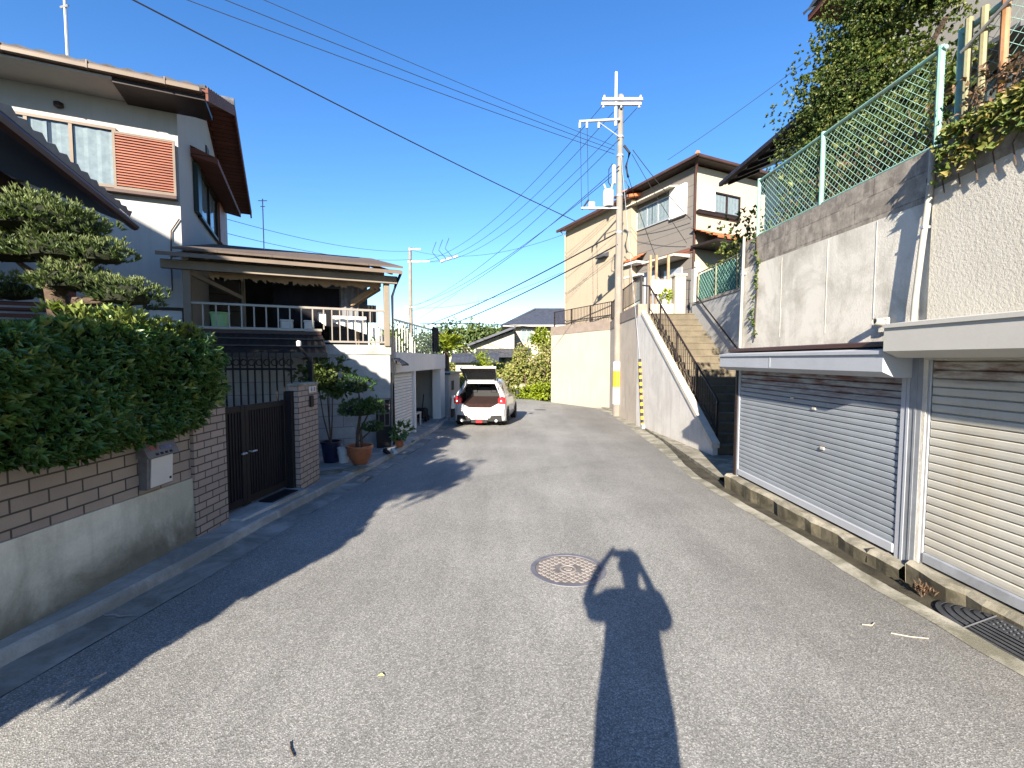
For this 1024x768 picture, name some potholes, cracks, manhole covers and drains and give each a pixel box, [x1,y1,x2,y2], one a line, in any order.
manhole cover [531,553,606,587]
